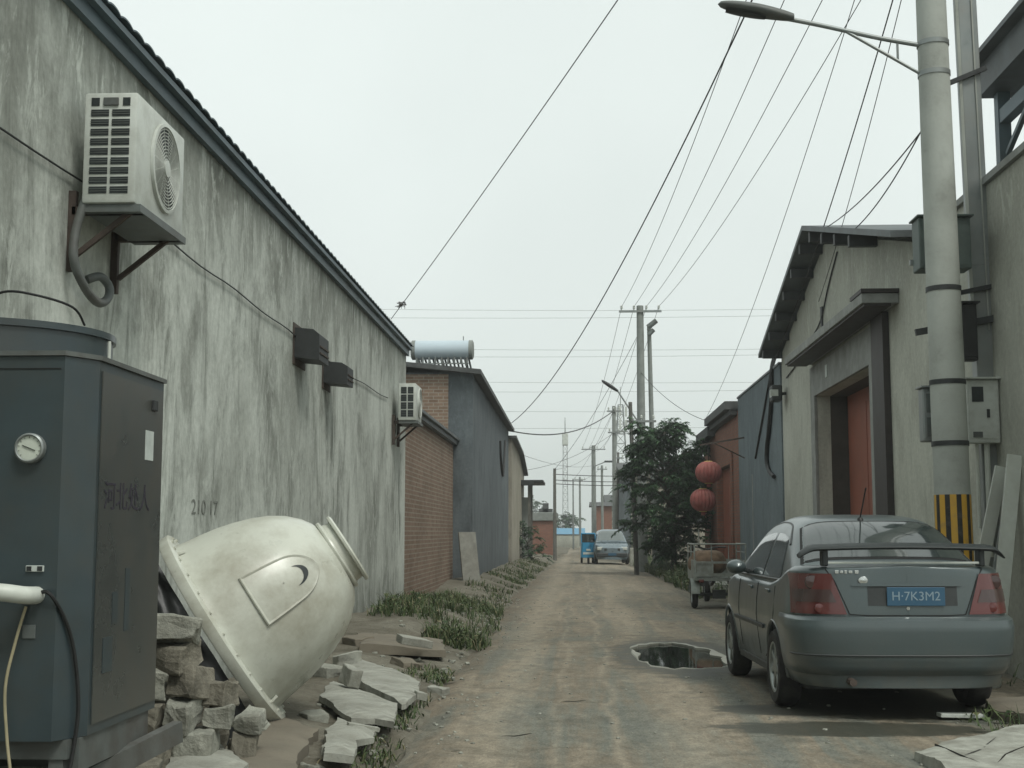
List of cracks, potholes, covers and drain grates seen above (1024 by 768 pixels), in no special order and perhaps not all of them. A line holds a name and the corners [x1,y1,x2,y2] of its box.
pothole [630,642,728,670]
